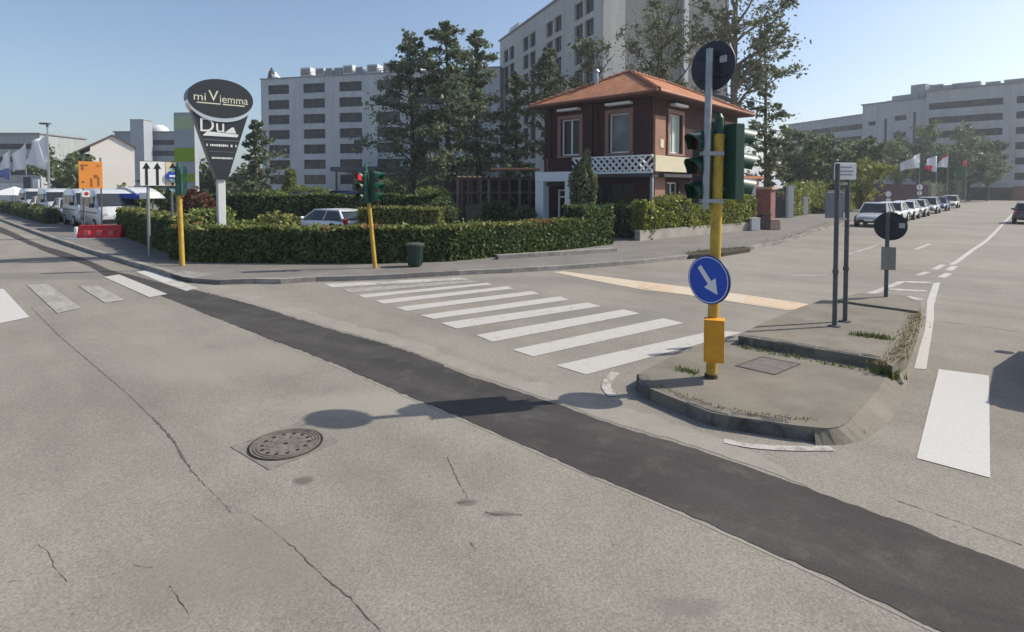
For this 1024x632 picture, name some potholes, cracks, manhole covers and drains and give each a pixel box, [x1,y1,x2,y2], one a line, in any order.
crack [447,456,523,515]
manhole cover [231,422,339,470]
utility cover [736,356,800,374]
crack [33,309,381,632]
